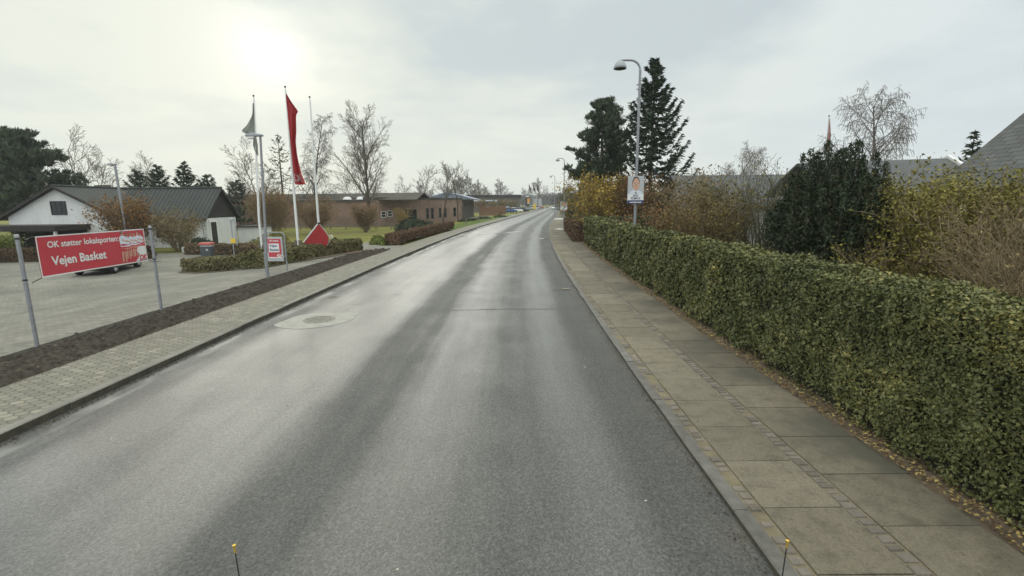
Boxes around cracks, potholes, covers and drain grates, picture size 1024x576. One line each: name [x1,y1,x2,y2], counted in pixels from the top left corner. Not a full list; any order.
manhole cover [274,313,357,329]
